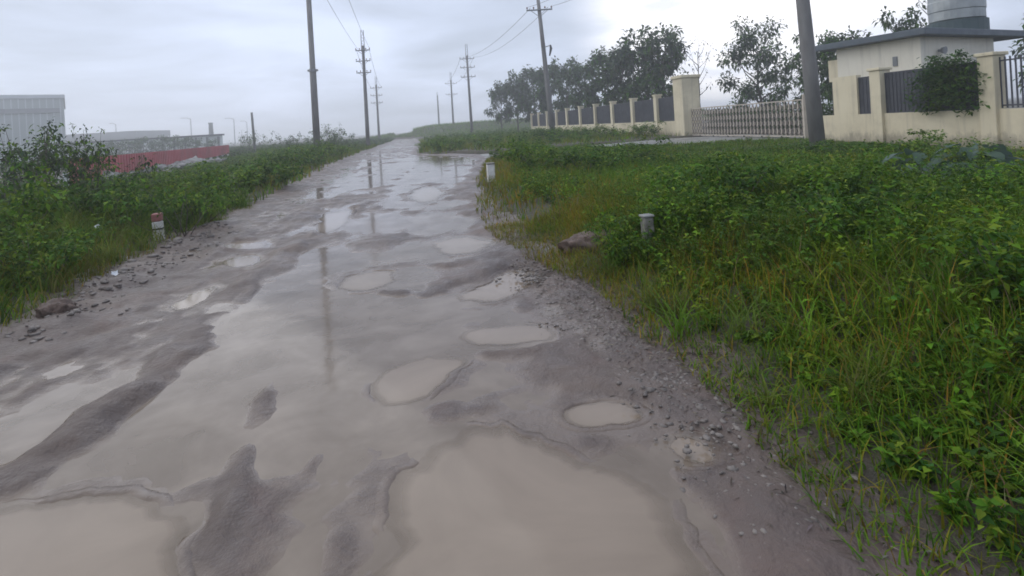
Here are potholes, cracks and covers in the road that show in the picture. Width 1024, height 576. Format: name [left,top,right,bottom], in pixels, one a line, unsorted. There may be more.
pothole [361,357,474,404]
pothole [462,322,565,349]
pothole [161,287,220,313]
pothole [401,185,453,202]
pothole [329,268,398,294]
pothole [363,419,725,576]
pothole [552,395,654,432]
pothole [427,235,503,258]
pothole [216,238,276,250]
pothole [459,267,548,306]
